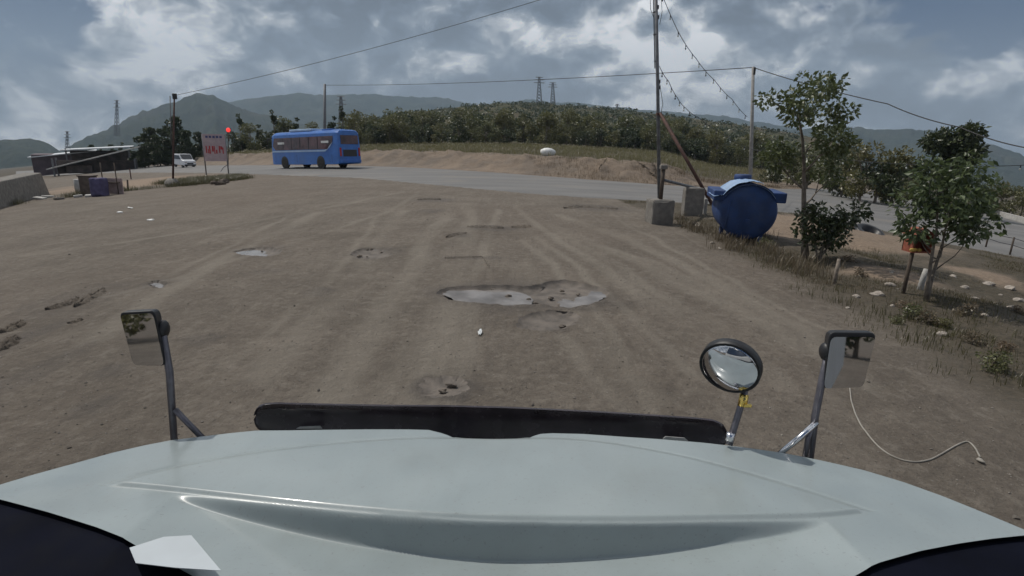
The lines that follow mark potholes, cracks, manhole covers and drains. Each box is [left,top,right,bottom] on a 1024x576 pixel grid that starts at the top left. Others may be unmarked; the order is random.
pothole [343,246,399,260]
pothole [402,370,484,405]
pothole [428,278,619,312]
pothole [505,307,591,334]
pothole [226,246,289,258]
pothole [137,279,178,290]
